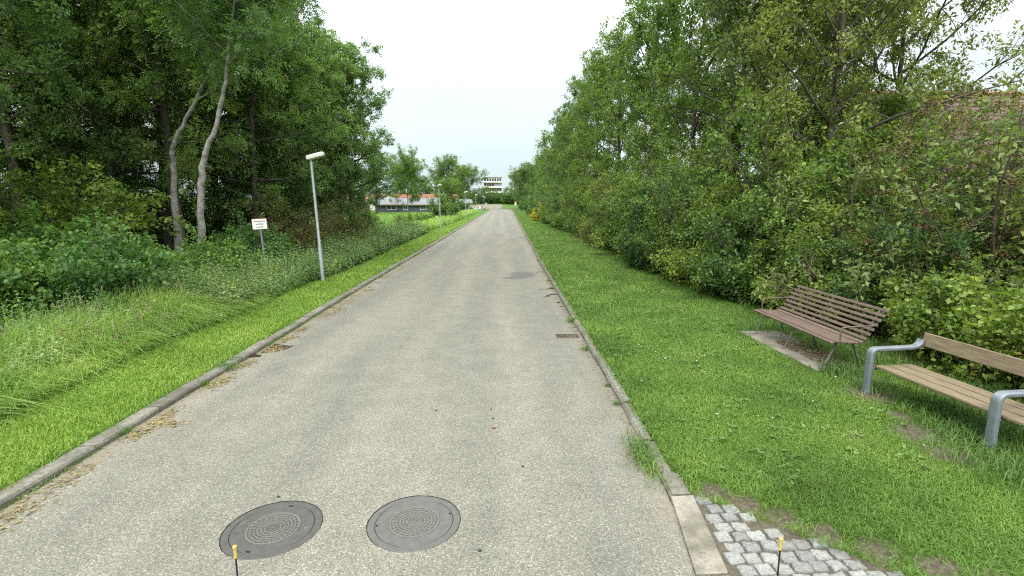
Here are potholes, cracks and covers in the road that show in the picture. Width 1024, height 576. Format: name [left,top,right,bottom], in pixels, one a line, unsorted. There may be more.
manhole cover [366,495,461,553]
manhole cover [219,501,323,560]
